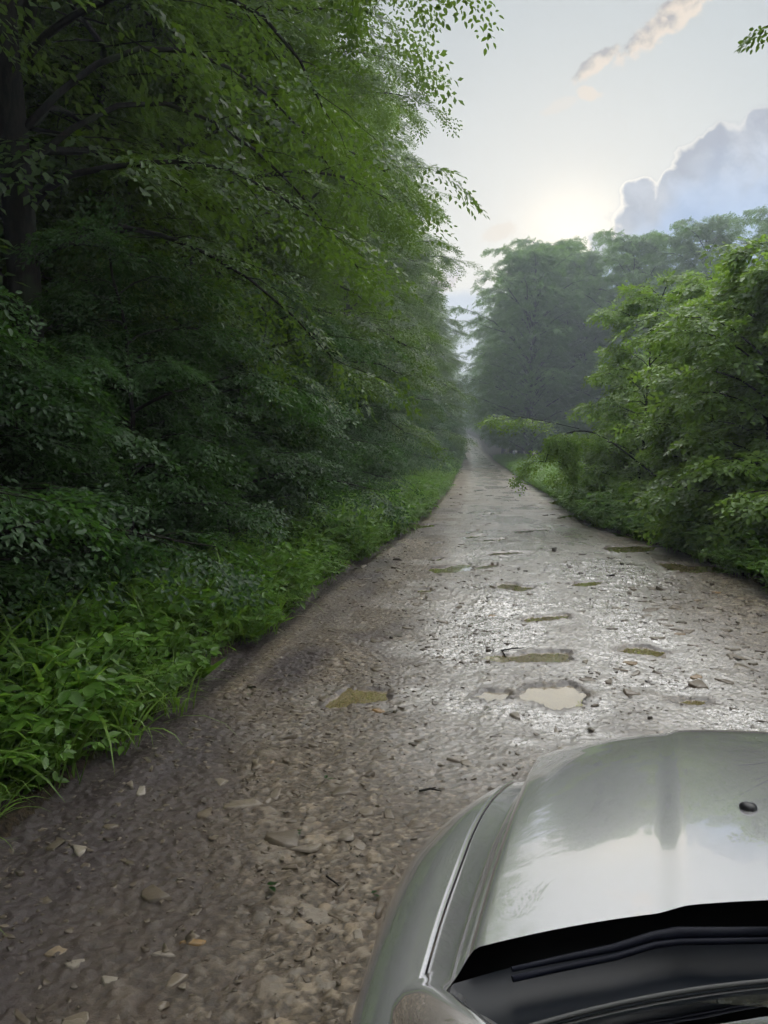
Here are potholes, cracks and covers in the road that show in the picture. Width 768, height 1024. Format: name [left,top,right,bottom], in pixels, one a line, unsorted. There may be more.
pothole [516,680,591,711]
pothole [424,564,474,573]
pothole [322,685,394,709]
pothole [495,581,539,592]
pothole [481,648,576,663]
pothole [667,697,711,705]
pothole [614,643,670,658]
pothole [518,613,572,623]
pothole [472,687,514,702]
pothole [602,545,658,553]
